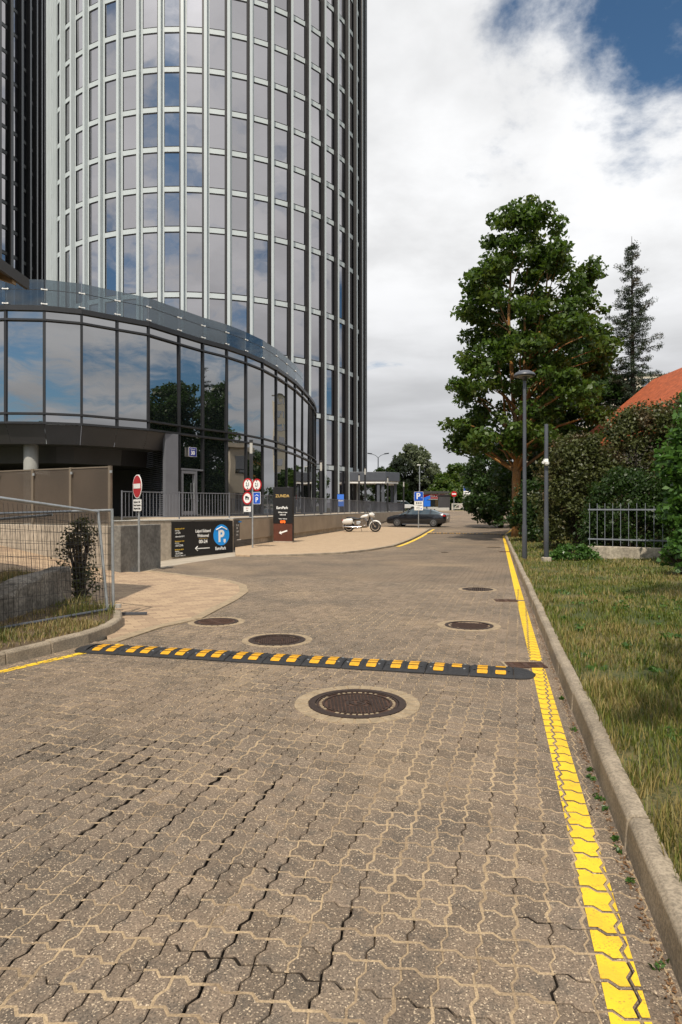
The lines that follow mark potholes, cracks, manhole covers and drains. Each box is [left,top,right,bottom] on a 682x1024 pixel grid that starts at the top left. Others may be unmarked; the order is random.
manhole cover [241,633,312,648]
manhole cover [458,587,497,595]
manhole cover [437,620,501,632]
manhole cover [294,685,420,728]
manhole cover [187,617,245,629]
